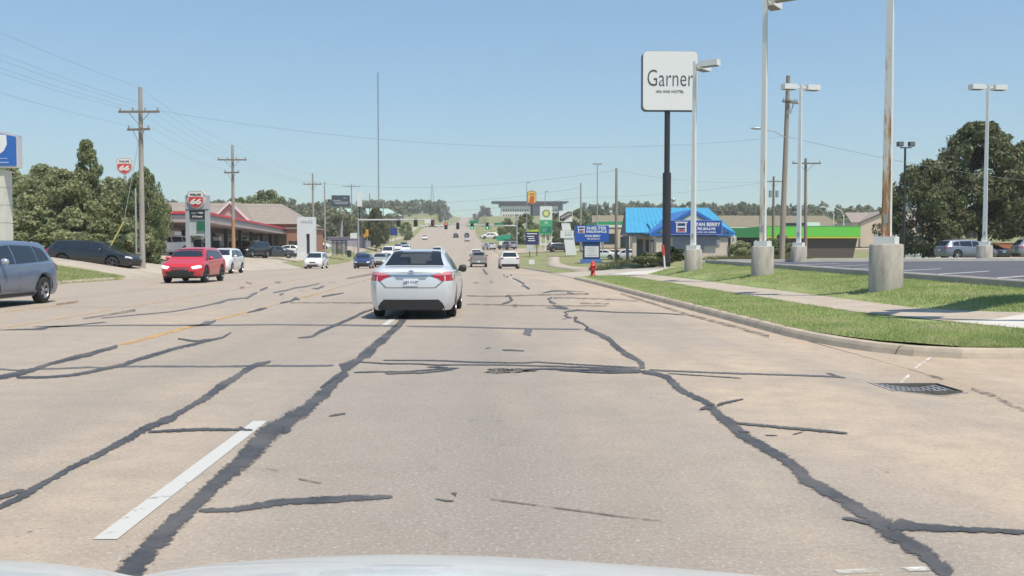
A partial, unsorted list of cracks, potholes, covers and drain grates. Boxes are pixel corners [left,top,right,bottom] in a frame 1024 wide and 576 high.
crack [410,269,680,330]
crack [649,369,847,378]
drain grate [868,382,967,397]
crack [0,274,392,379]
